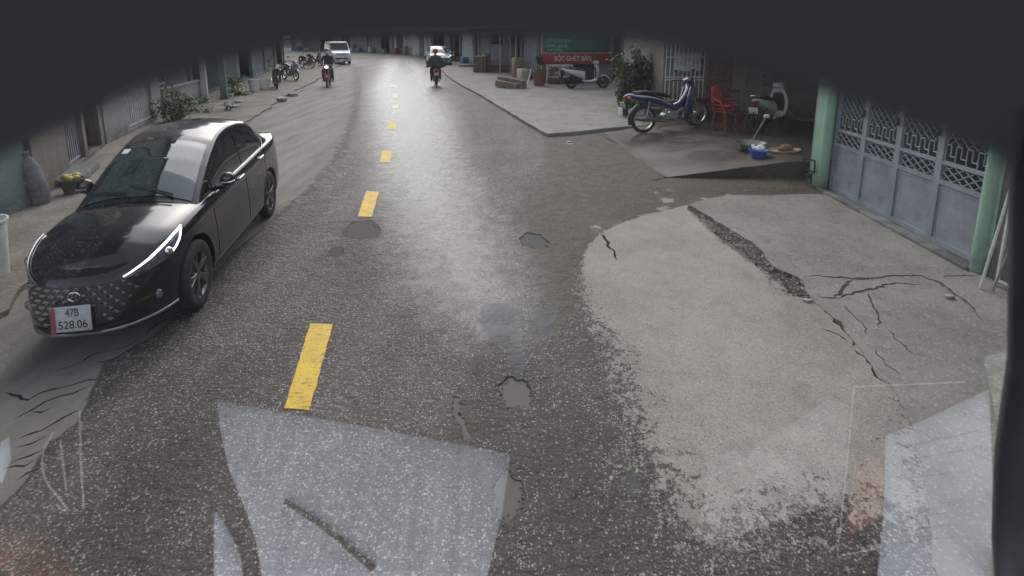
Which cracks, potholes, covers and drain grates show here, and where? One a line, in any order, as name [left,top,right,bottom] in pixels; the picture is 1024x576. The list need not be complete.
crack [601,234,617,260]
pothole [327,247,346,259]
crack [4,310,182,480]
pothole [519,232,550,249]
pothole [452,395,471,439]
crack [687,206,982,383]
pothole [342,219,382,240]
pothole [495,375,534,410]
pothole [489,468,525,526]
